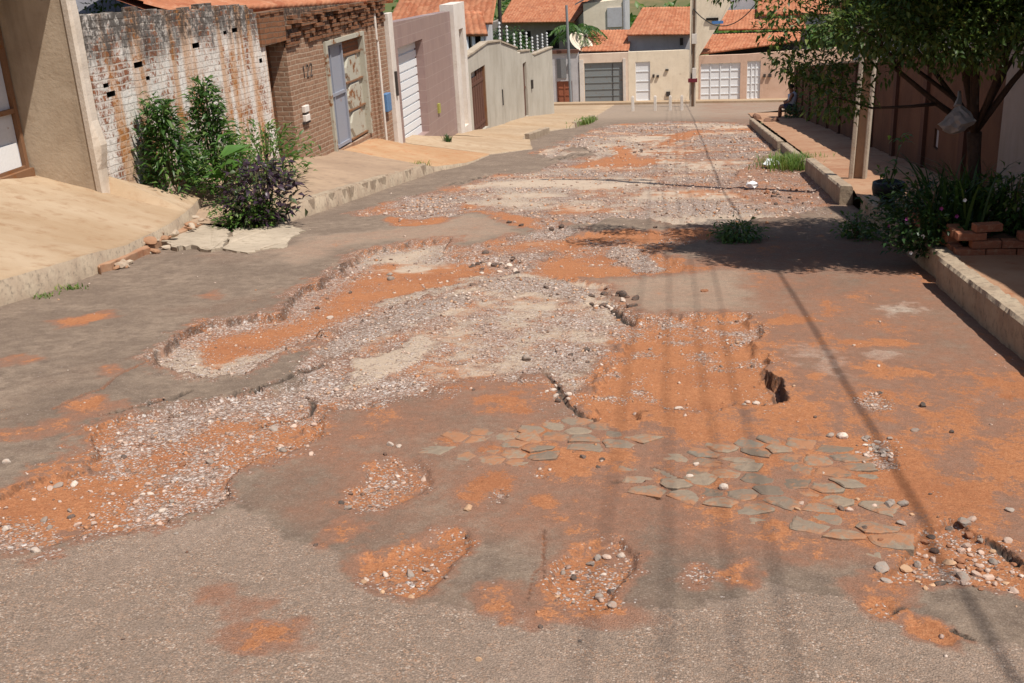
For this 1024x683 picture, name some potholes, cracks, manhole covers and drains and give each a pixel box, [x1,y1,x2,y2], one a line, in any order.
pothole [730,164,835,206]
pothole [0,364,375,551]
pothole [385,215,451,226]
pothole [141,237,532,379]
pothole [545,536,644,611]
pothole [661,130,703,144]
crack [528,529,548,601]
pothole [350,527,478,600]
pothole [343,457,438,512]
pothole [302,226,641,419]
